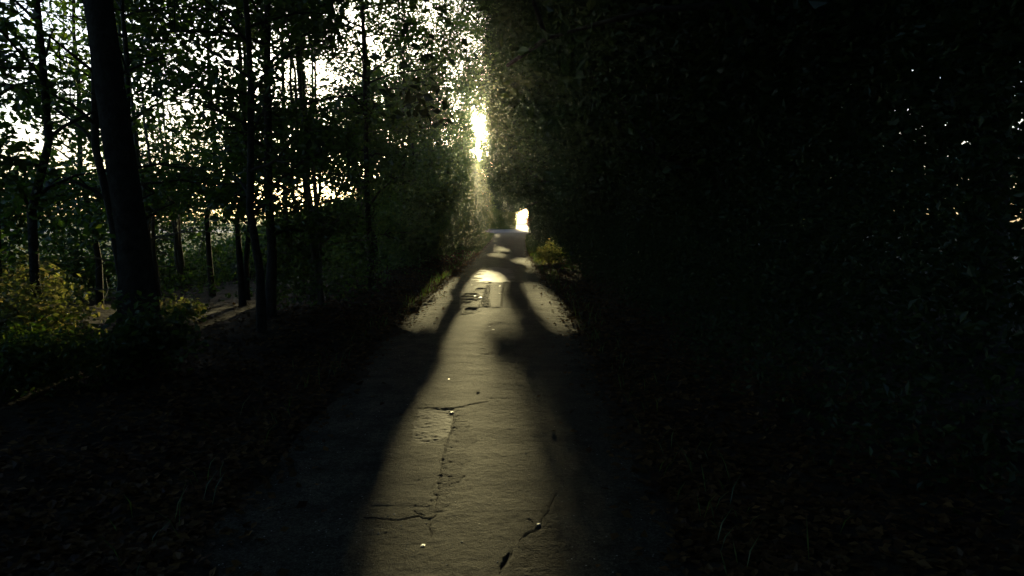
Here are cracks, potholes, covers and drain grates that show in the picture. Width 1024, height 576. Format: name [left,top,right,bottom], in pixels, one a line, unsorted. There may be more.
crack [499,495,555,573]
crack [363,511,434,537]
